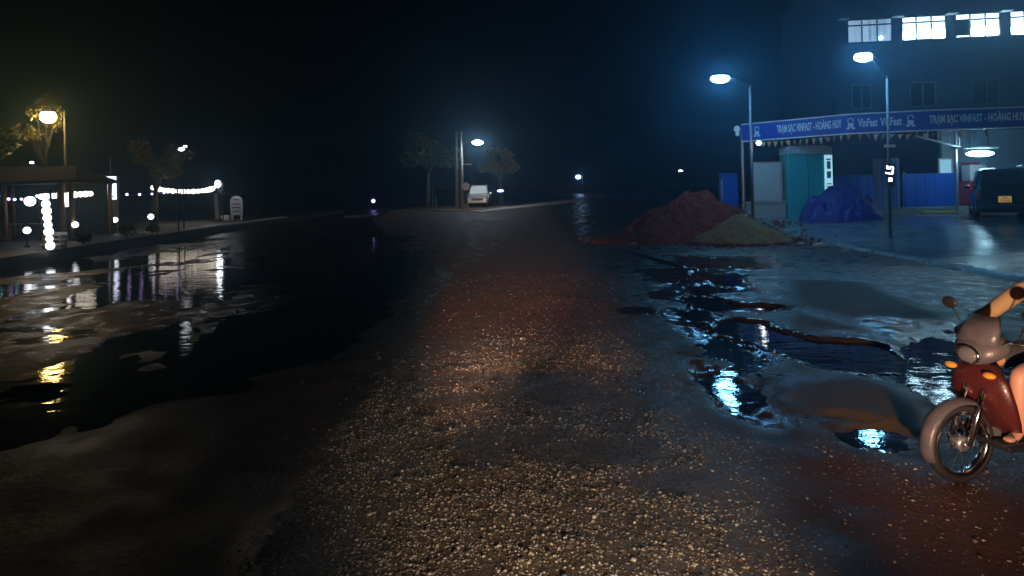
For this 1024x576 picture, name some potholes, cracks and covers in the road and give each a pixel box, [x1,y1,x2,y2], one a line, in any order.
pothole [704,316,906,377]
pothole [616,306,657,315]
pothole [672,295,797,313]
pothole [684,272,752,289]
